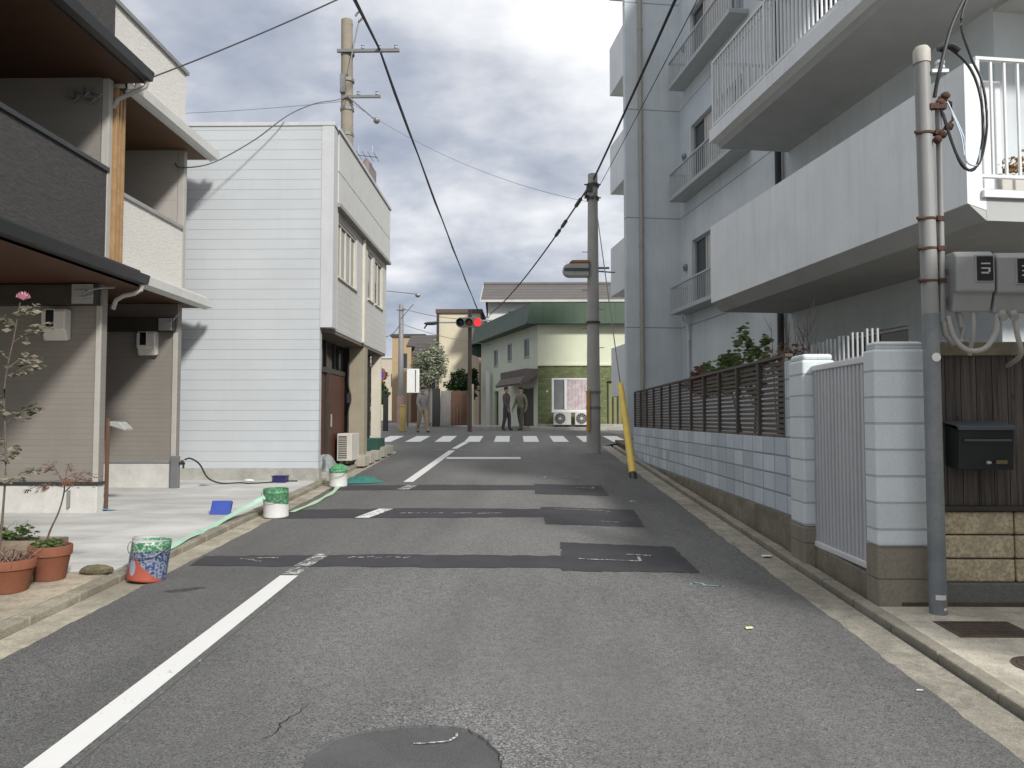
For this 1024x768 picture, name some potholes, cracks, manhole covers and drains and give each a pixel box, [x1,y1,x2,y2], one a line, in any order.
manhole cover [1010,656,1024,670]
